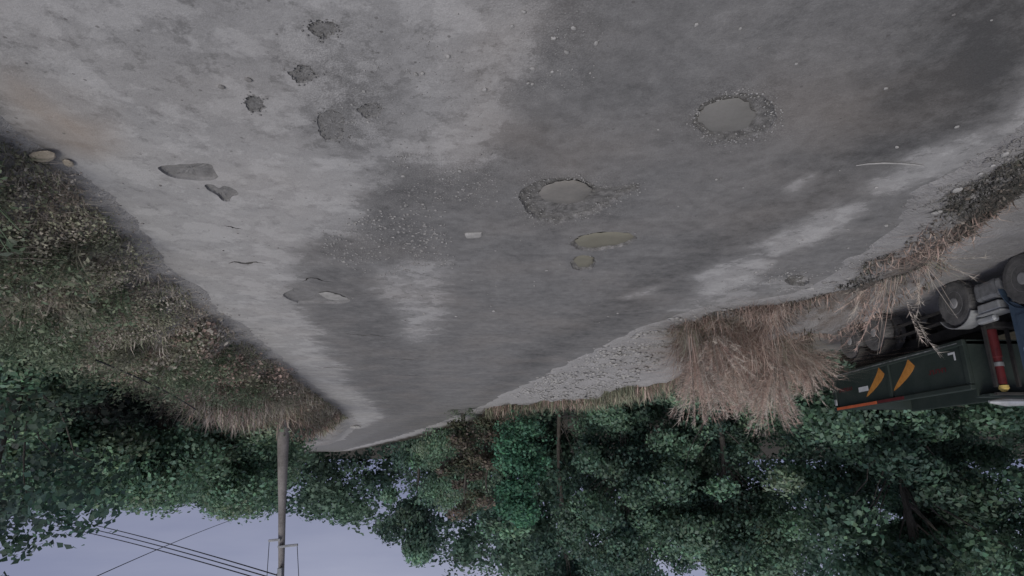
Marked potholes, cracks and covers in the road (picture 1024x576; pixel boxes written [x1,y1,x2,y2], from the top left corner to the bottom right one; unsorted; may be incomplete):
pothole [301,19,343,43]
pothole [680,85,791,147]
pothole [158,163,218,181]
pothole [283,63,325,86]
pothole [356,103,385,119]
pothole [785,275,811,286]
pothole [240,91,268,116]
pothole [312,108,351,143]
pothole [505,172,646,227]
pothole [570,255,596,271]
pothole [570,231,637,252]
pothole [205,184,238,202]
